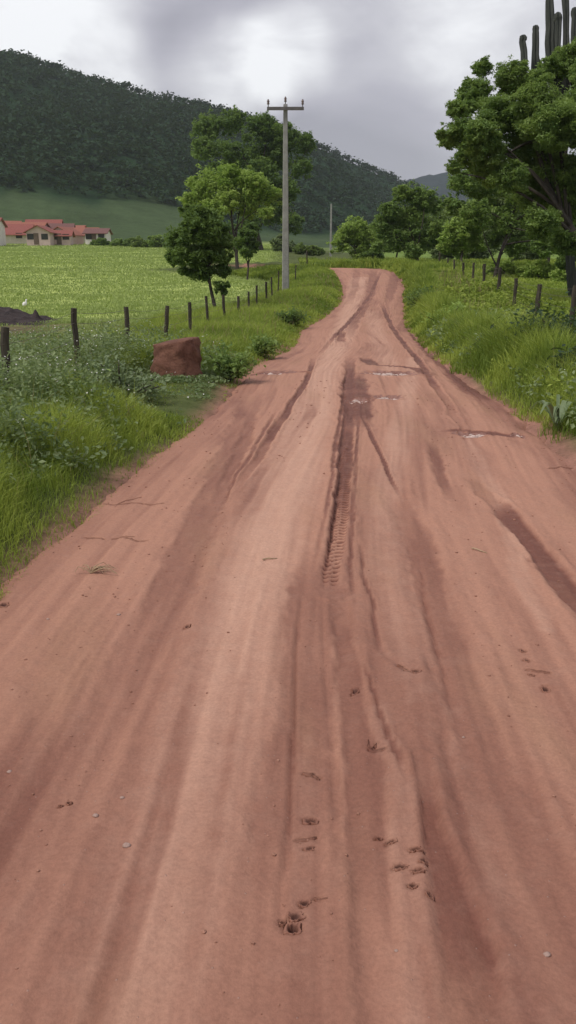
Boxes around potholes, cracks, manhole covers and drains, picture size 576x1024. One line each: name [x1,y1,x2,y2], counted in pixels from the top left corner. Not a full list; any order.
crack [103,497,164,506]
pothole [448,431,491,439]
pothole [346,397,370,405]
